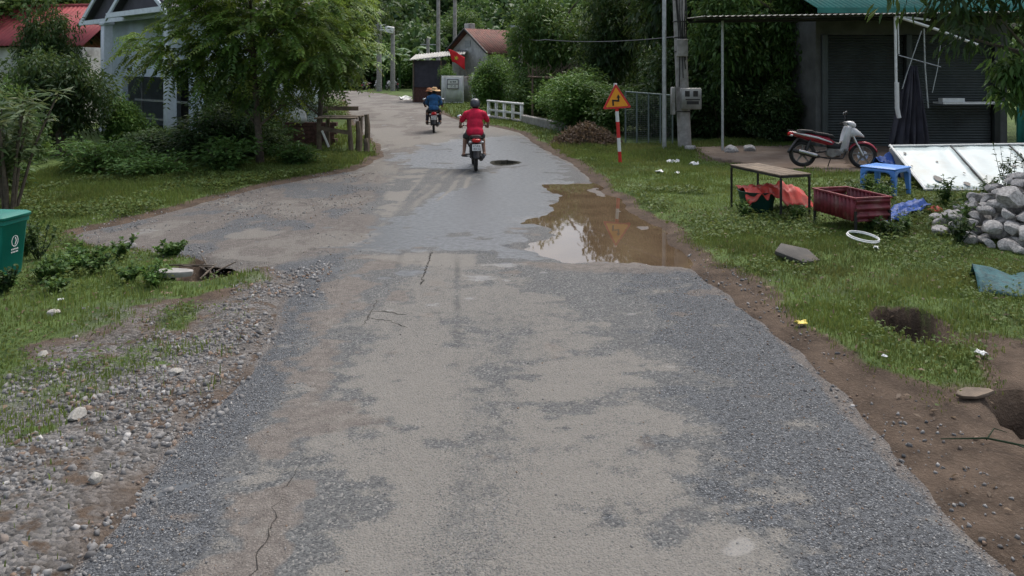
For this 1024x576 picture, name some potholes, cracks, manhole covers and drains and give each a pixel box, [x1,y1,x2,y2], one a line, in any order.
crack [364,302,408,328]
crack [249,459,304,576]
